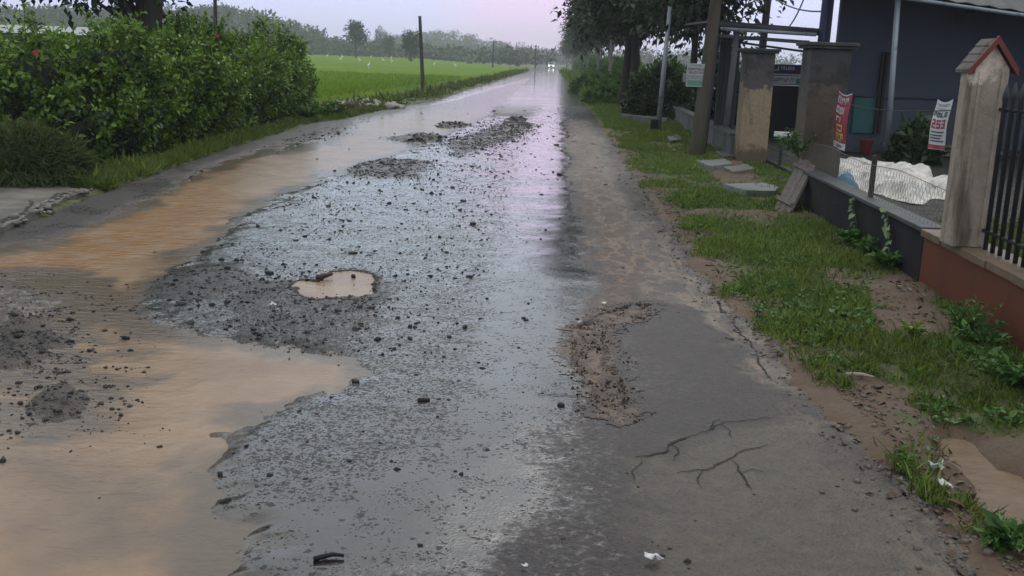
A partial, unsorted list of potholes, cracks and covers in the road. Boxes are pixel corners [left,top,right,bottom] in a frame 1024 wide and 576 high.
crack [717,302,768,375]
crack [631,418,769,489]
pothole [279,266,391,300]
pothole [551,300,668,427]
